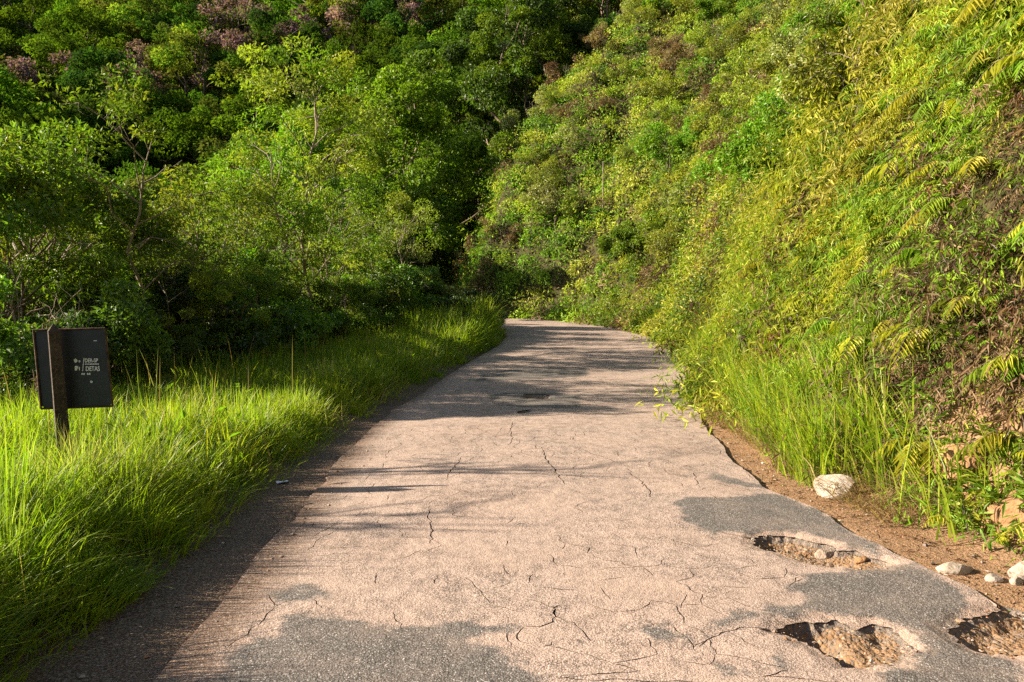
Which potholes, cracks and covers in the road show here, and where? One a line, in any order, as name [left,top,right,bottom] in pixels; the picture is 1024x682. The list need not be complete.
crack [228,425,825,682]
pothole [776,620,914,669]
pothole [753,535,887,570]
pothole [948,607,1024,658]
